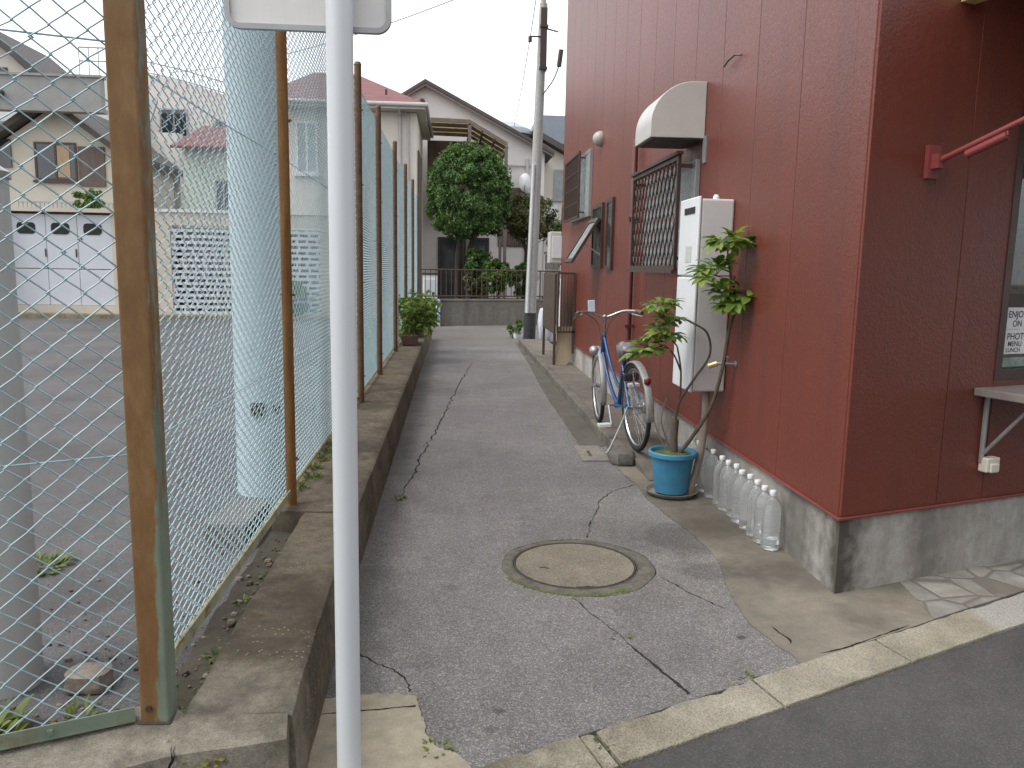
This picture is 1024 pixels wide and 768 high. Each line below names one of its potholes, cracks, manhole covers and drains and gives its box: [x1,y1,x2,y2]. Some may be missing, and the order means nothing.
crack [823,626,906,653]
crack [395,361,474,512]
crack [321,654,415,715]
crack [573,598,690,695]
manhole cover [502,540,656,597]
